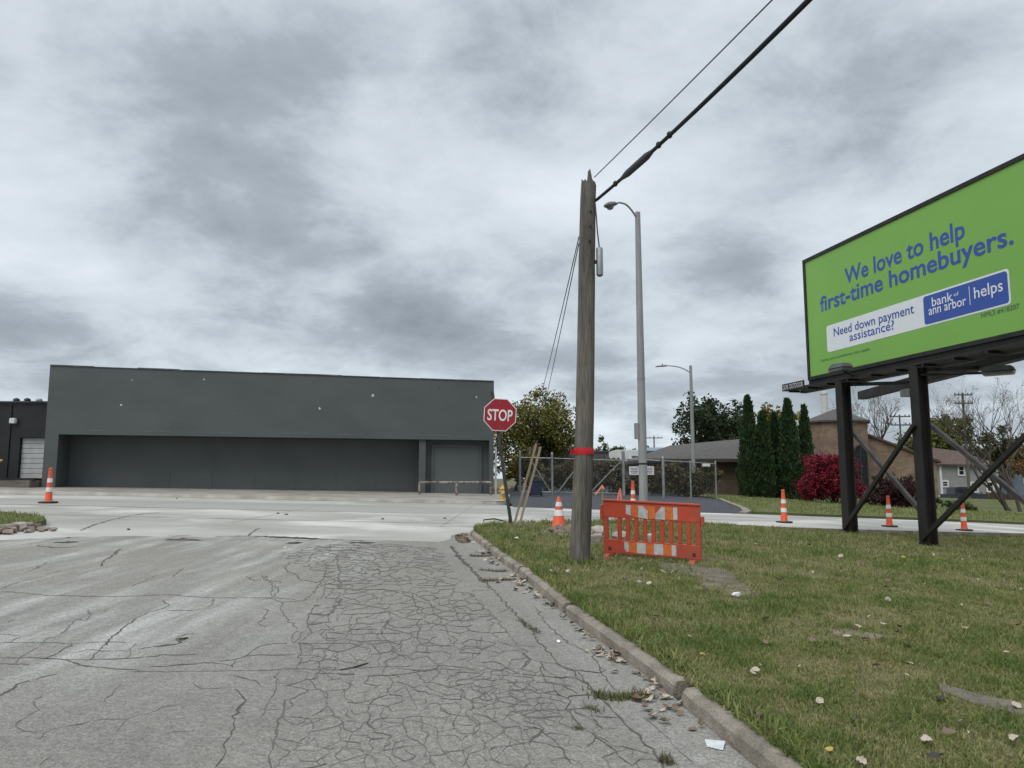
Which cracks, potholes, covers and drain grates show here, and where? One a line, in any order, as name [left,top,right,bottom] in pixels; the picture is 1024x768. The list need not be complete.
crack [0,513,648,768]
